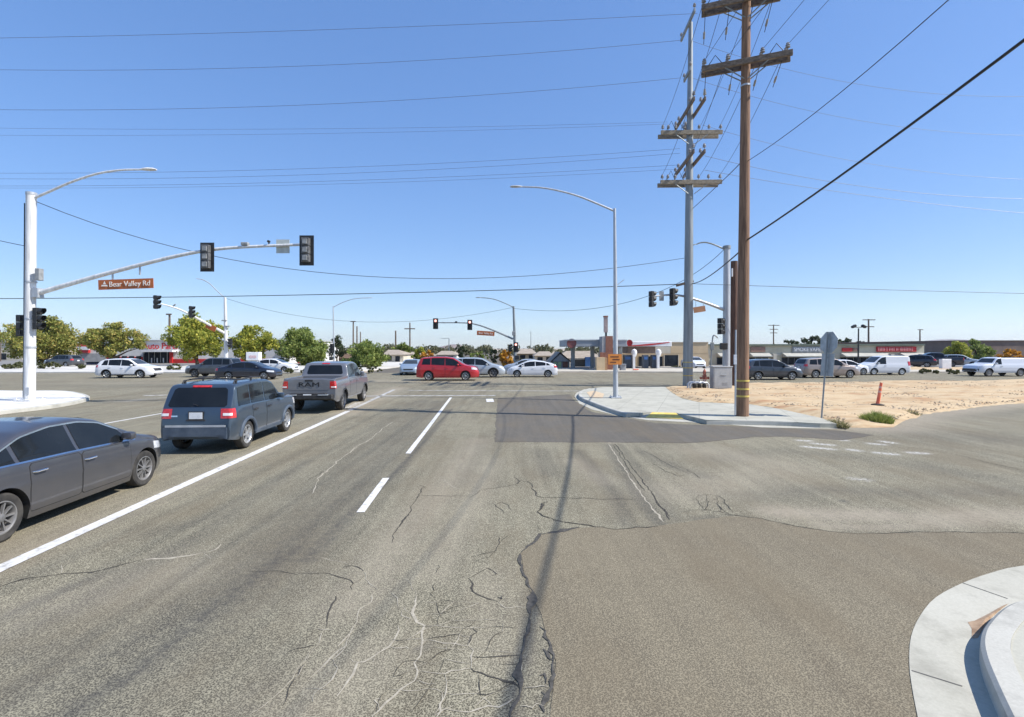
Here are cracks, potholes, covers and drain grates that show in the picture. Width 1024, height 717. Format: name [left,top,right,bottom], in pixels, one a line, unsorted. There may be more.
crack [392,478,636,542]
crack [468,536,518,608]
crack [247,558,556,717]
crack [609,443,700,521]
crack [0,544,221,587]
